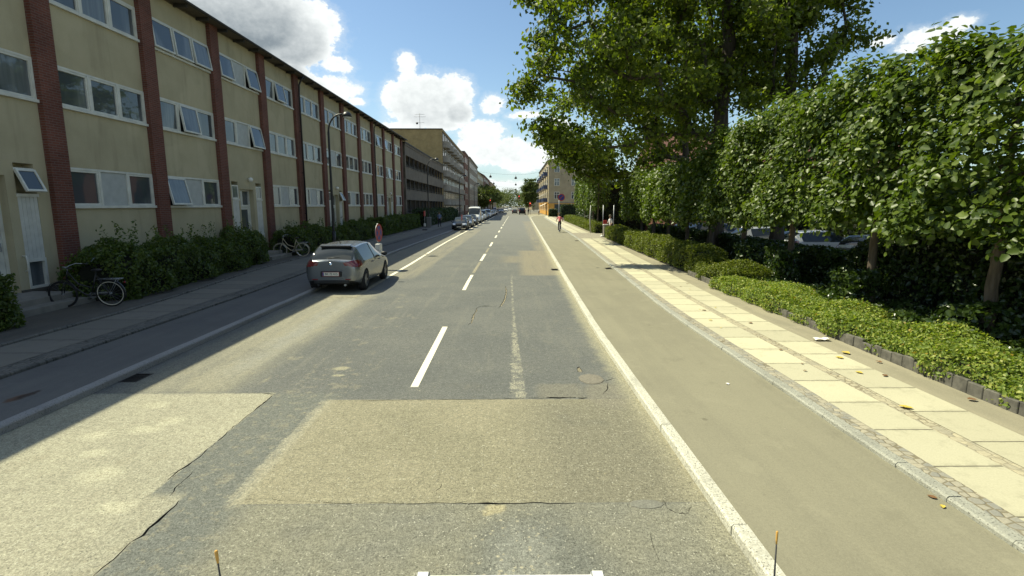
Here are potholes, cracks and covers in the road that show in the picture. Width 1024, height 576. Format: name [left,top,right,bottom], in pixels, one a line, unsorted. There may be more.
drain grate [119,373,154,382]
crack [93,393,273,576]
